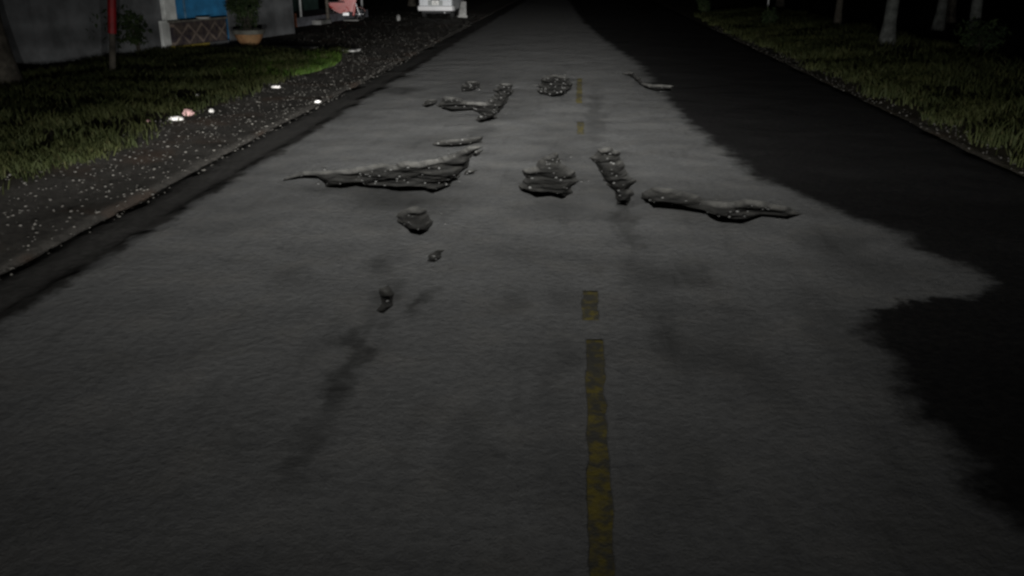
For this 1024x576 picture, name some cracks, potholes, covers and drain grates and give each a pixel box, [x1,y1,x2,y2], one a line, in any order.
pothole [432,136,484,147]
pothole [589,145,636,206]
pothole [437,83,514,124]
pothole [641,187,802,224]
pothole [396,206,446,235]
pothole [283,146,482,193]
pothole [518,152,589,199]
pothole [535,74,573,97]
pothole [622,71,674,91]
pothole [376,285,394,313]
pothole [460,81,480,92]
pothole [427,249,444,262]
